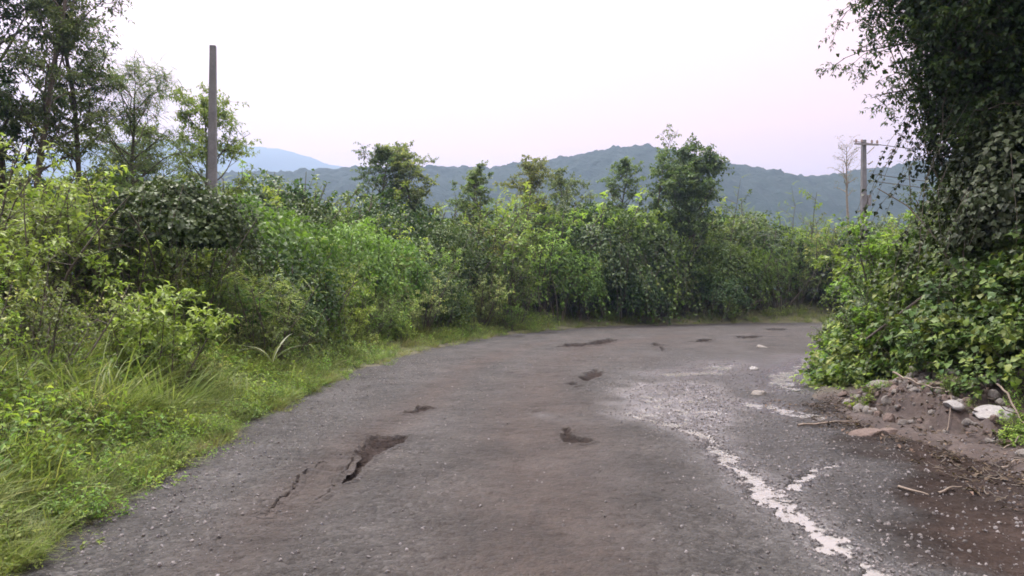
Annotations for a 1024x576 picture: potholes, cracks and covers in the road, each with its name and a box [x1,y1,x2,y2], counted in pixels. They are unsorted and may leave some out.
pothole [332,431,414,485]
pothole [550,338,623,348]
pothole [571,369,614,383]
pothole [399,405,440,414]
crack [257,455,362,519]
pothole [555,426,600,445]
